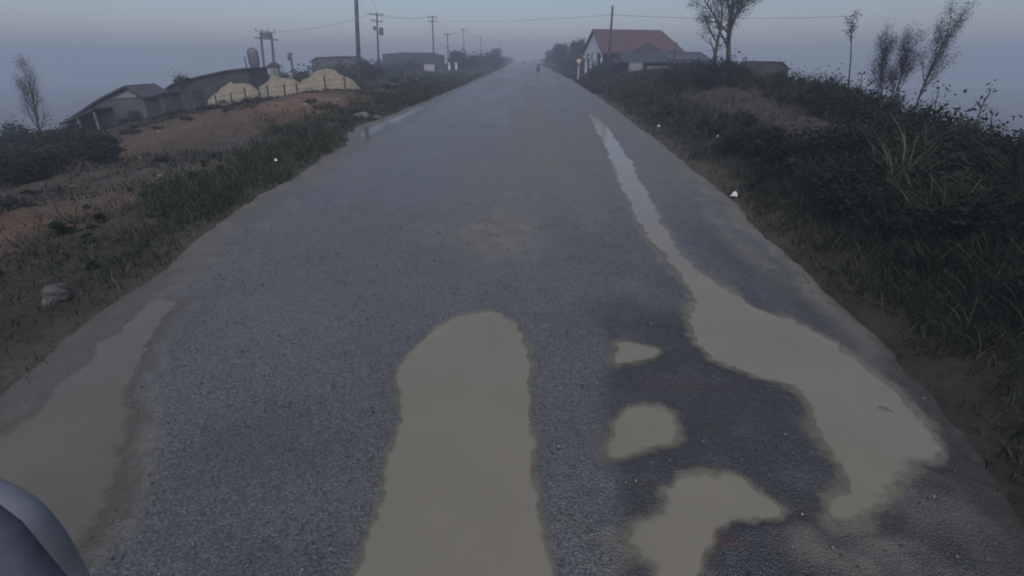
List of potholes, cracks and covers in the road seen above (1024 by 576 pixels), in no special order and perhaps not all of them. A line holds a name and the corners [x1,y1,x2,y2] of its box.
pothole [605,464,800,576]
pothole [340,308,568,576]
pothole [586,113,960,544]
